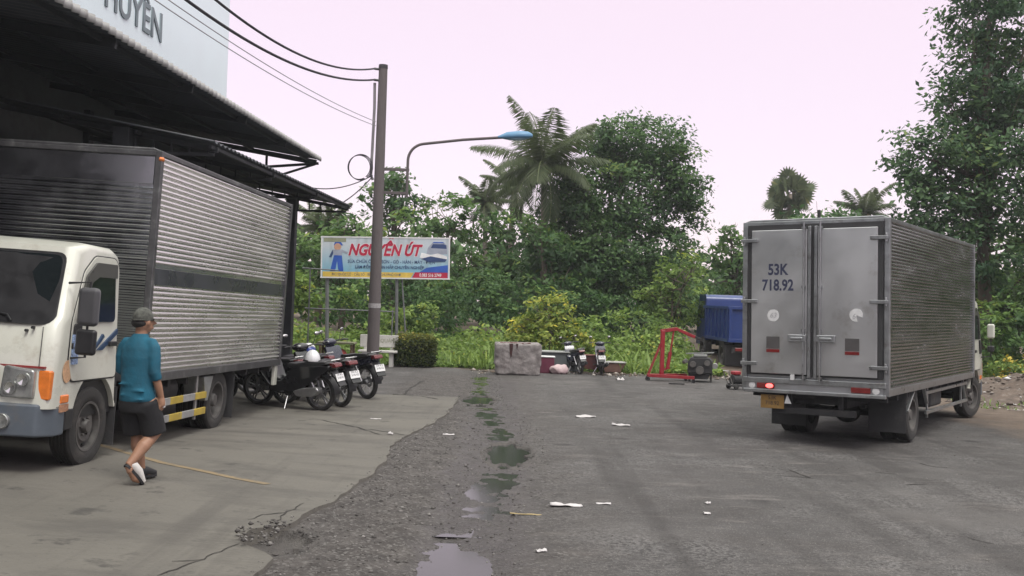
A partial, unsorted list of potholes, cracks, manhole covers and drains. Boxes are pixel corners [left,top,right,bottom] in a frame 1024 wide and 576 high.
pothole [458,395,500,407]
pothole [480,440,537,470]
crack [157,503,303,576]
